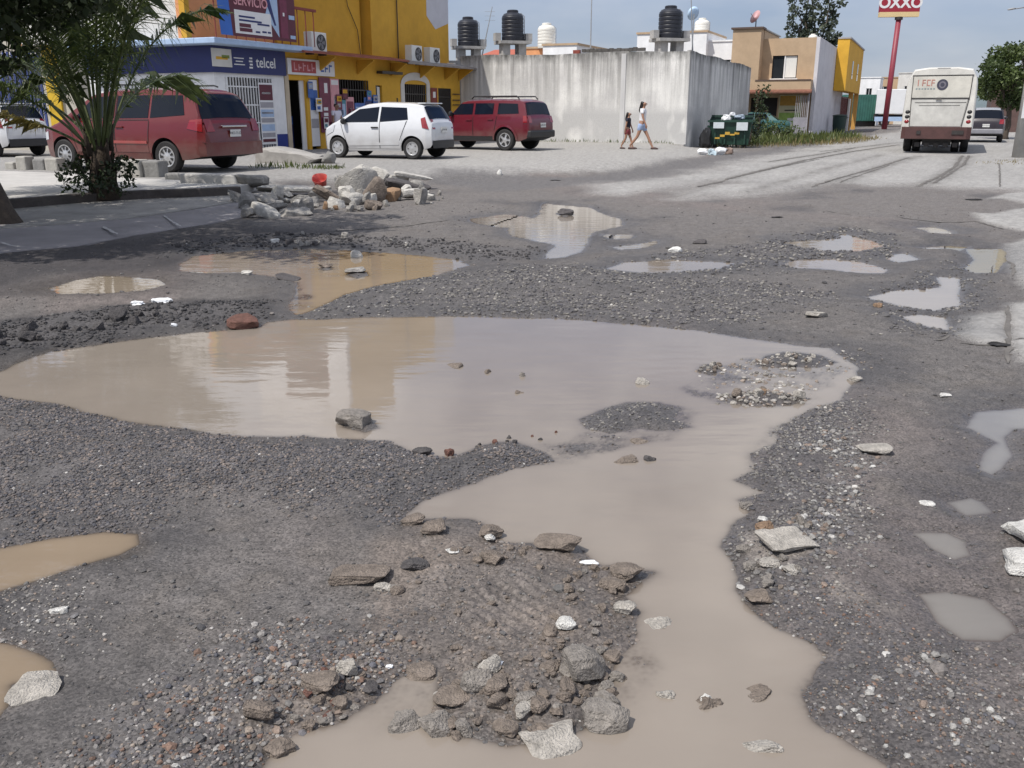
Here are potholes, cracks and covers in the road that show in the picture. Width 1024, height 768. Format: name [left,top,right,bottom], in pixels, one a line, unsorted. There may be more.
pothole [154,244,493,315]
pothole [581,253,763,277]
pothole [884,568,1024,657]
crack [897,216,1004,229]
pothole [488,199,648,263]
pothole [758,227,907,254]
pothole [842,269,990,317]
pothole [937,396,1024,485]
pothole [0,306,970,768]
pothole [886,517,1000,570]
pothole [937,242,1024,276]
